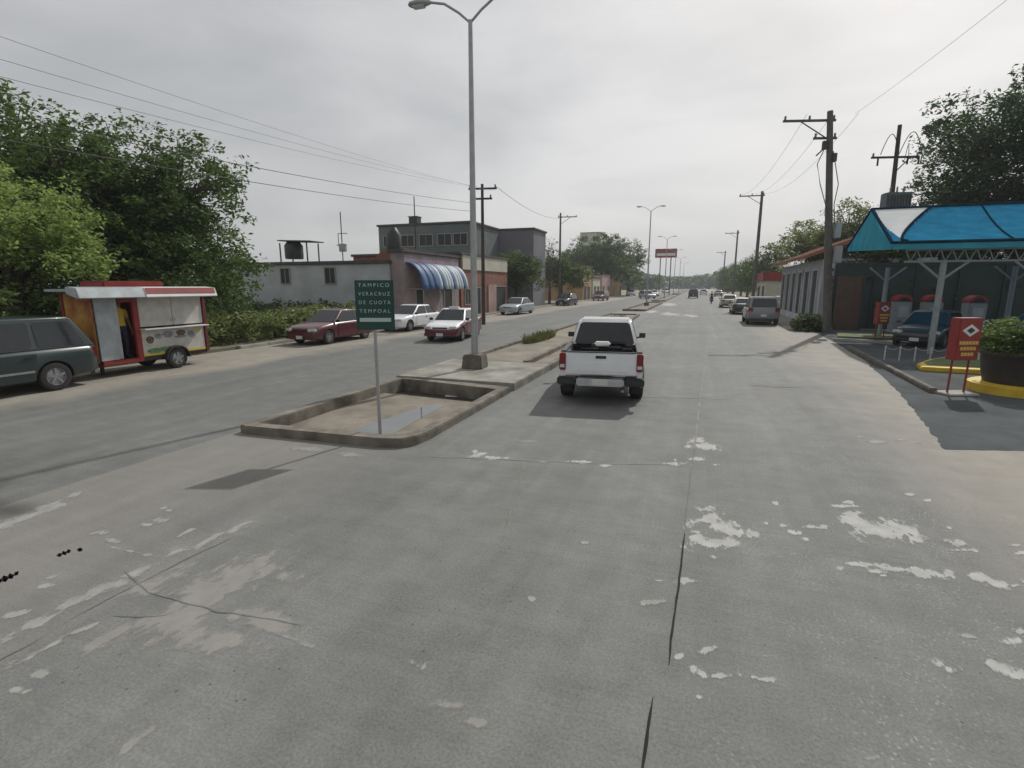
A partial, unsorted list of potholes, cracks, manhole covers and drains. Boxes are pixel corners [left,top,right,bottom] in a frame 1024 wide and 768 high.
crack [0,539,303,660]
crack [669,533,685,663]
crack [641,697,653,768]
